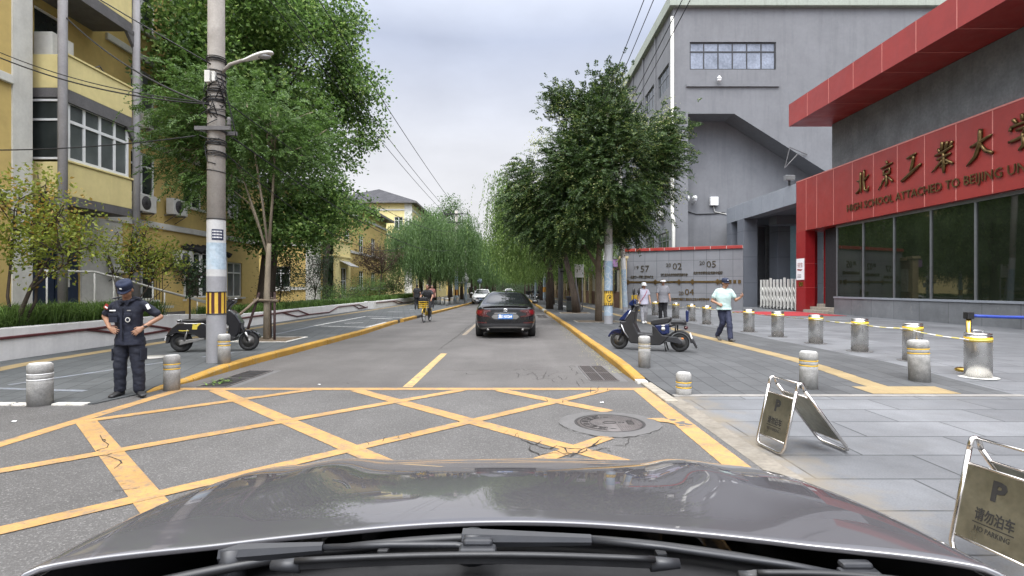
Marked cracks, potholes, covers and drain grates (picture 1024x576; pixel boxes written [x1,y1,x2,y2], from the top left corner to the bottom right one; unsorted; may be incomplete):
drain grate [576,366,628,382]
manhole cover [560,412,663,438]
drain grate [194,370,279,388]
crack [73,435,140,490]
crack [514,422,661,456]
